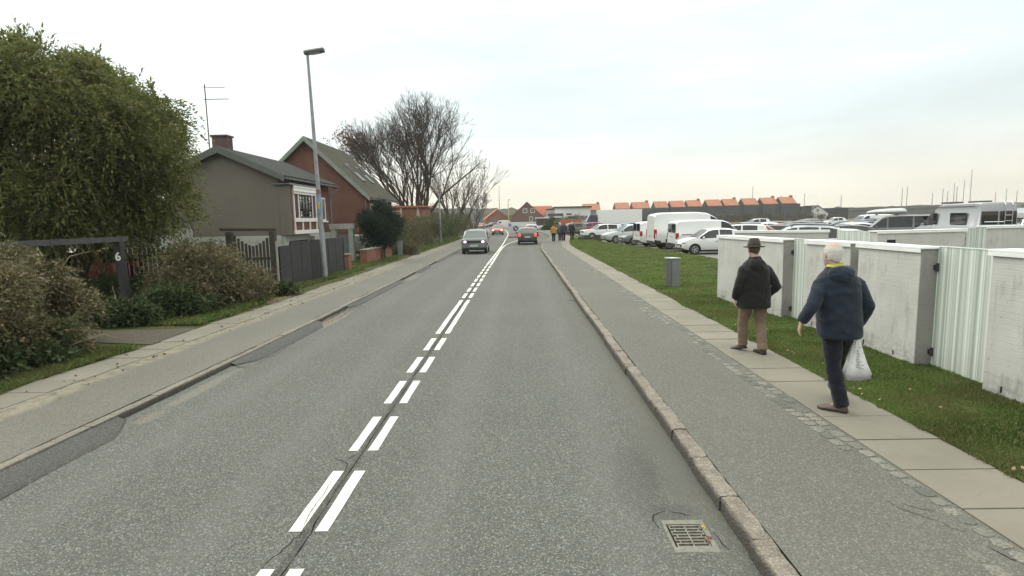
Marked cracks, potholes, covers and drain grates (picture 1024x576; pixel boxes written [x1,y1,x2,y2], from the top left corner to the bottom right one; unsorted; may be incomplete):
drain grate [661,520,721,553]
crack [887,500,1015,560]
crack [652,511,728,549]
